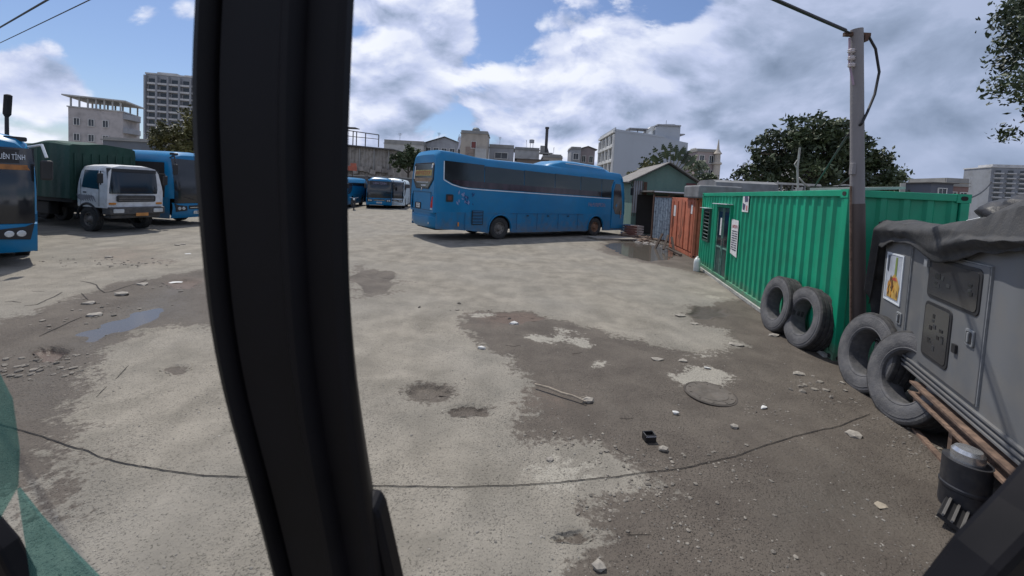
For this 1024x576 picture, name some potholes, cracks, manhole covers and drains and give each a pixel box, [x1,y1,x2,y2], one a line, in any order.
pothole [547,528,596,545]
pothole [28,345,73,363]
pothole [402,382,458,400]
pothole [158,363,193,377]
pothole [441,404,495,418]
manhole cover [684,381,738,407]
